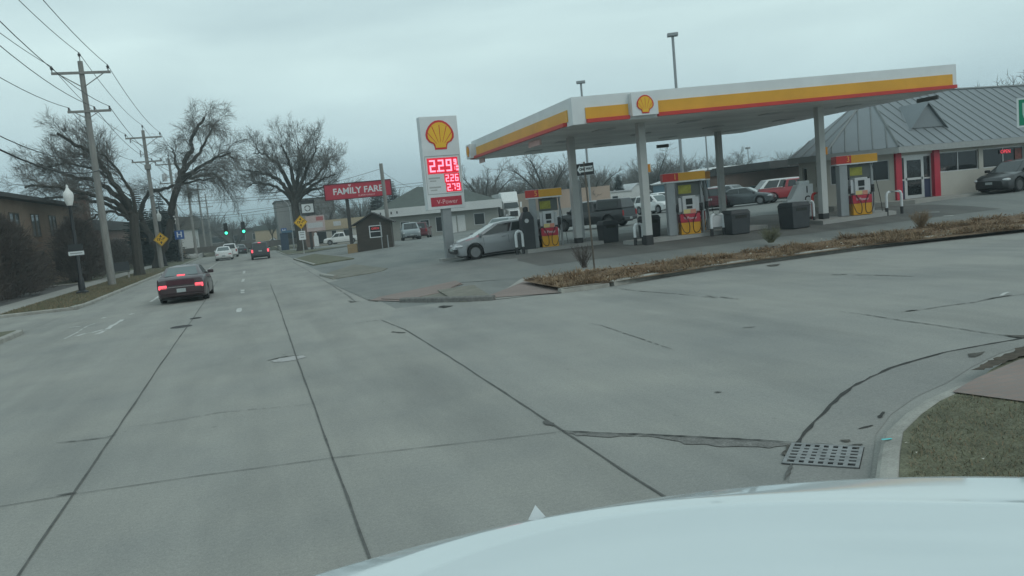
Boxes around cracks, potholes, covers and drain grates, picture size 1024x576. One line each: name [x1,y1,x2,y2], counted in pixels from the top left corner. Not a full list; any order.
crack [801,412,885,446]
crack [543,421,784,442]
drain grate [781,442,864,469]
